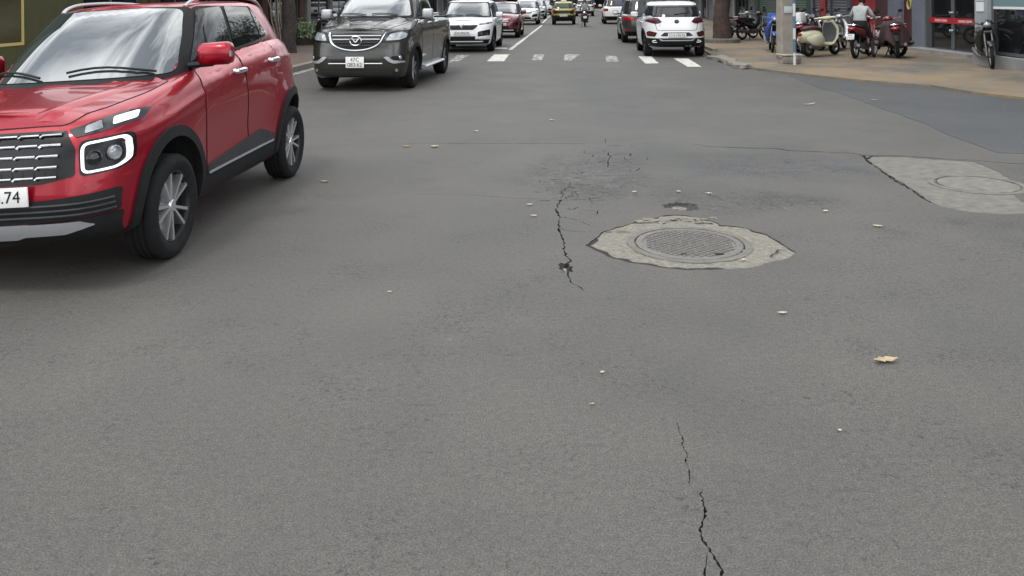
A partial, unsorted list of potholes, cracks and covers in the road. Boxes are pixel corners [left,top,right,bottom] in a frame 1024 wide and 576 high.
pothole [662,202,699,211]
crack [677,422,724,576]
crack [540,145,648,291]
manhole cover [586,215,797,270]
